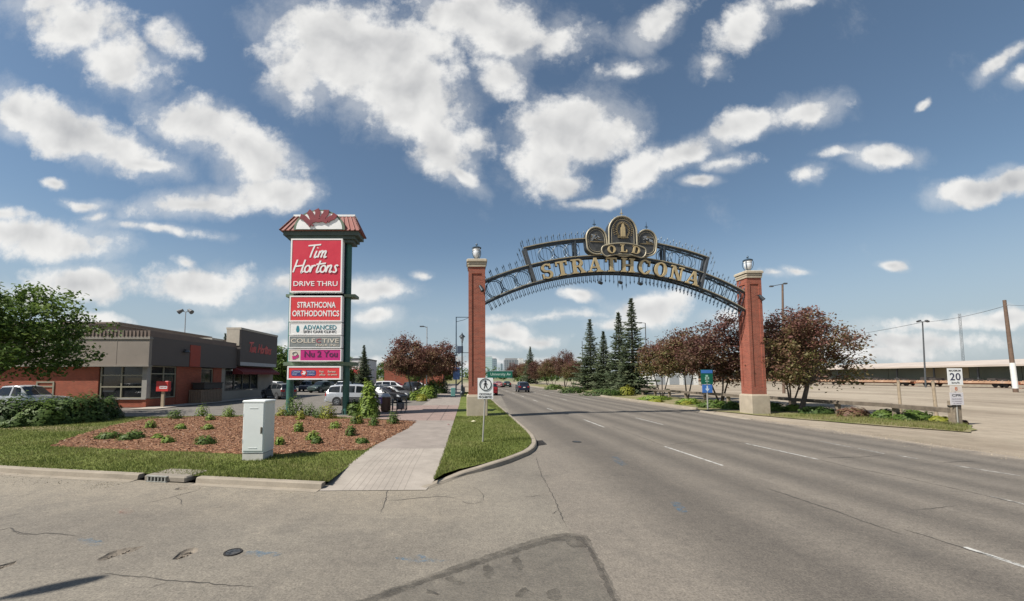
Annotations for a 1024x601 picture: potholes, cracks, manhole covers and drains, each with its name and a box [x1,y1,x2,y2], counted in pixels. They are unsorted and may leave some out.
manhole cover [223,548,243,556]
drain grate [145,469,207,483]
pothole [97,546,143,561]
pothole [173,548,199,560]
crack [528,459,567,527]
